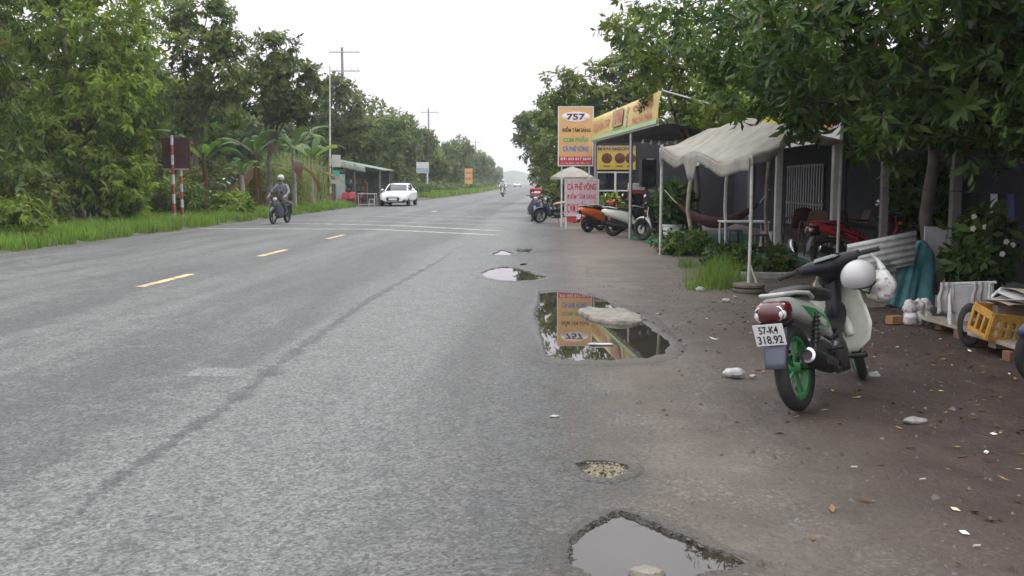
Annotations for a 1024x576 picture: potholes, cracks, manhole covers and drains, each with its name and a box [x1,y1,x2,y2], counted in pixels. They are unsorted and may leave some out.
pothole [562,457,644,484]
pothole [470,266,557,282]
pothole [544,504,773,576]
pothole [516,288,687,366]
